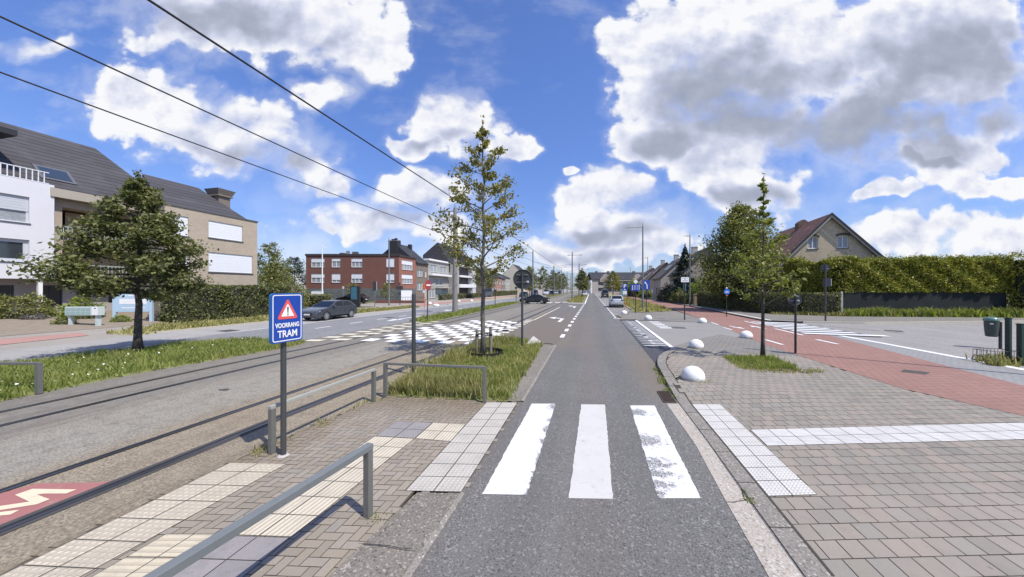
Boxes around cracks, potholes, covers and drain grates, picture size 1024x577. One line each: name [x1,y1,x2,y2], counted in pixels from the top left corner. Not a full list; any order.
drain grate [657,391,677,403]
